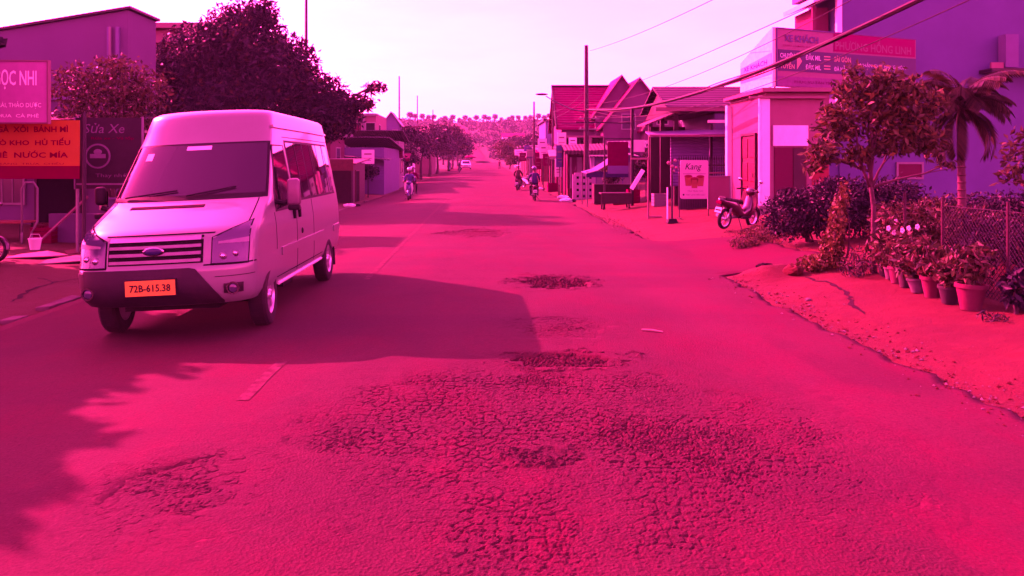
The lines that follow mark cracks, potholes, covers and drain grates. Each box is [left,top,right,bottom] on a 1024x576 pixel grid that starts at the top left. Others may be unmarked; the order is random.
crack [11,278,79,302]
pothole [495,272,623,292]
pothole [491,441,598,475]
crack [806,277,865,314]
crack [42,310,992,576]
pothole [477,347,657,378]
